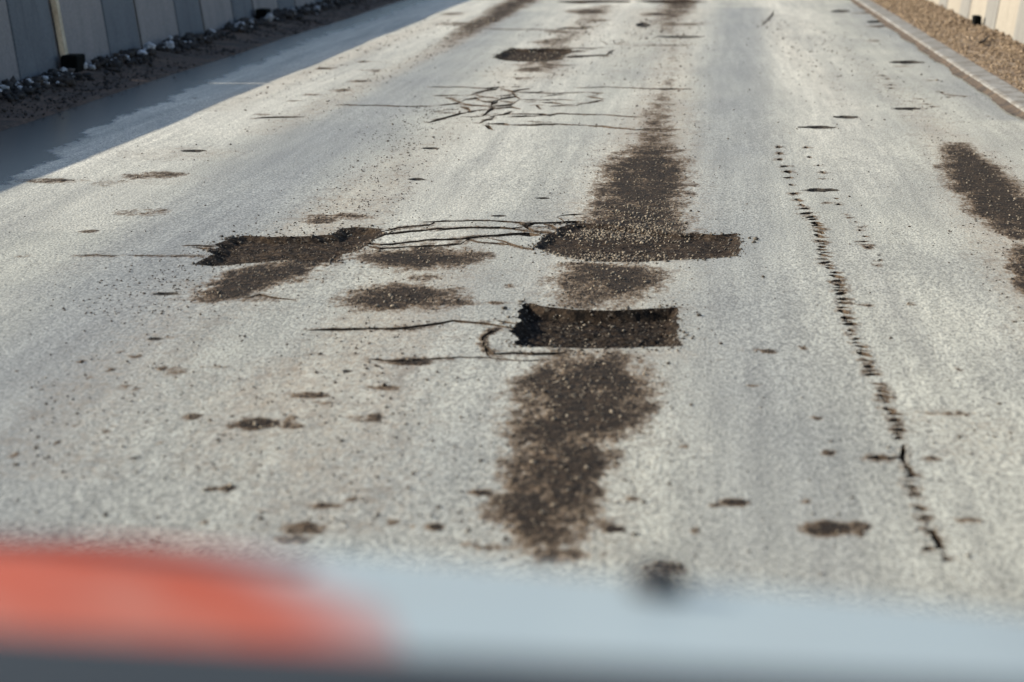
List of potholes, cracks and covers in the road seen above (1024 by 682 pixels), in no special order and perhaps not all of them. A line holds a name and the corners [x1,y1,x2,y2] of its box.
crack [307,320,568,362]
pothole [192,227,384,266]
crack [367,214,583,251]
pothole [509,303,683,349]
crack [345,86,680,130]
crack [776,146,953,561]
pothole [493,48,572,62]
